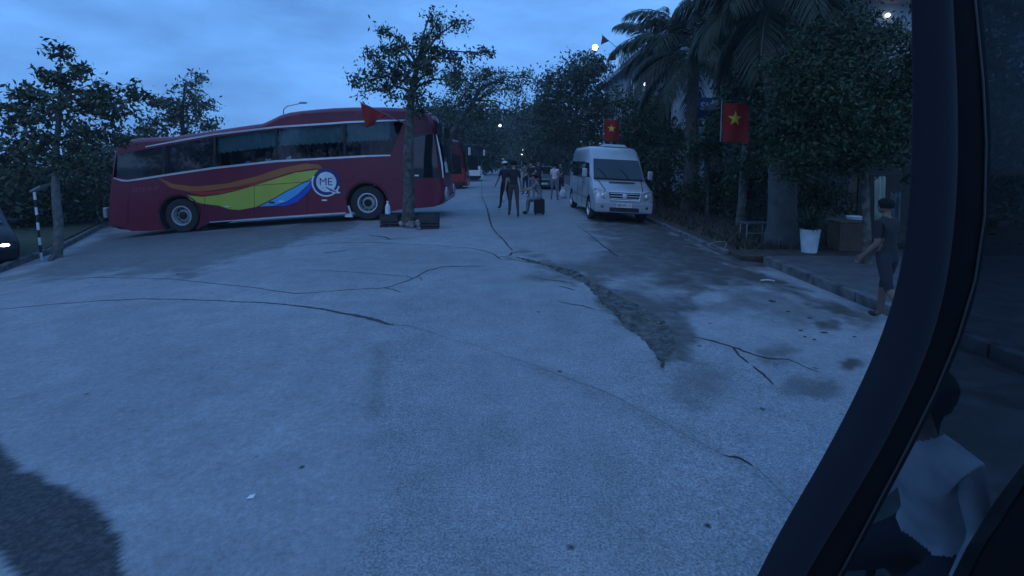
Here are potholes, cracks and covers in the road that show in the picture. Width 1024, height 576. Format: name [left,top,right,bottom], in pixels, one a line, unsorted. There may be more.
crack [6,266,794,506]
crack [696,337,816,384]
